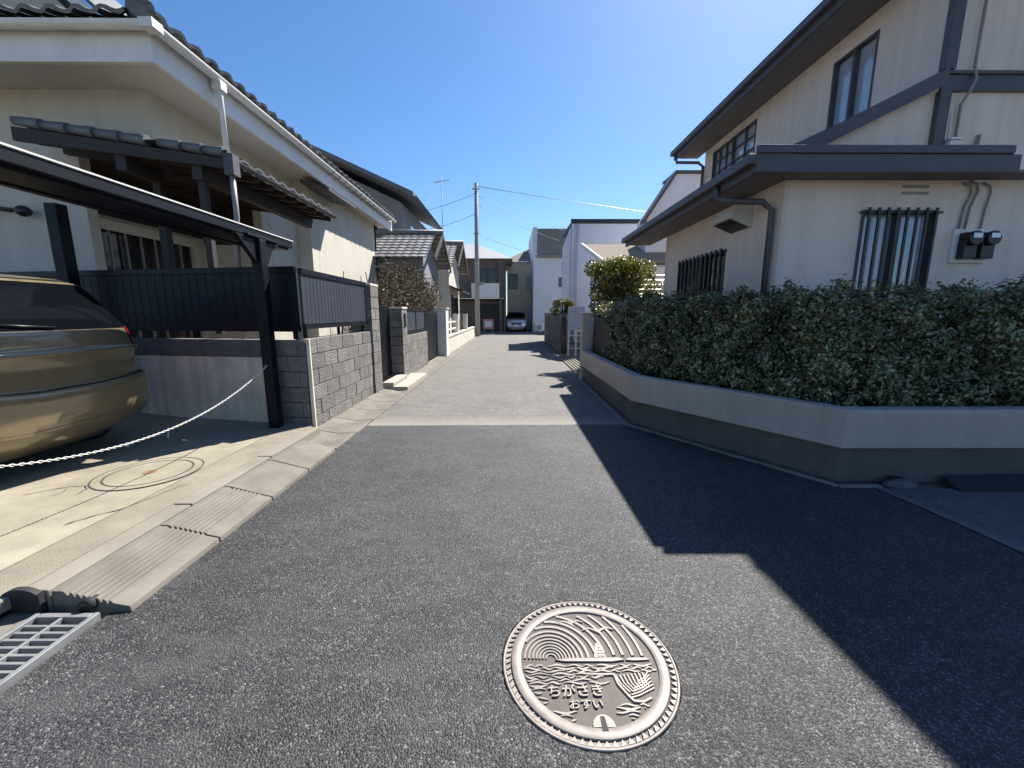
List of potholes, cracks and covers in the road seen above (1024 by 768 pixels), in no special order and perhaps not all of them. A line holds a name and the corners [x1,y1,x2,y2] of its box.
drain grate [0,612,101,695]
crack [65,484,188,525]
manhole cover [88,457,204,491]
manhole cover [502,601,681,754]
